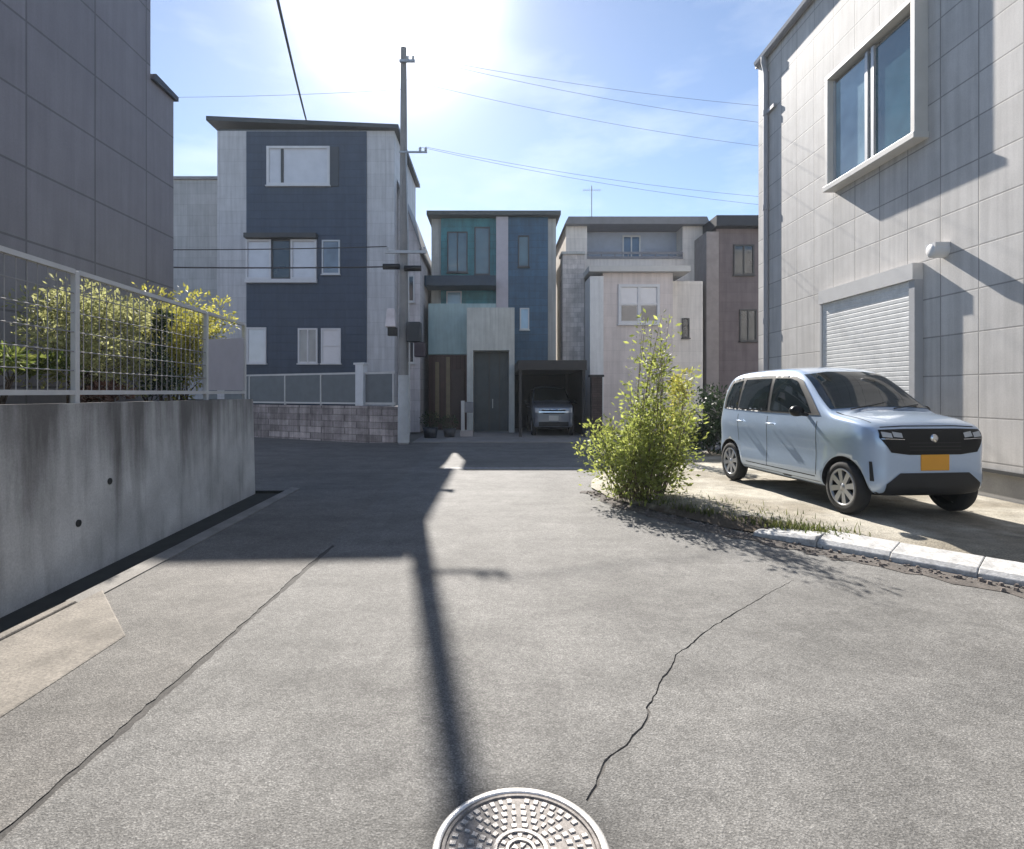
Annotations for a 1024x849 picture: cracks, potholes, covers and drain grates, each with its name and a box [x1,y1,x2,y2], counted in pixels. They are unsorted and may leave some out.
crack [586,581,791,801]
manhole cover [432,788,609,849]
